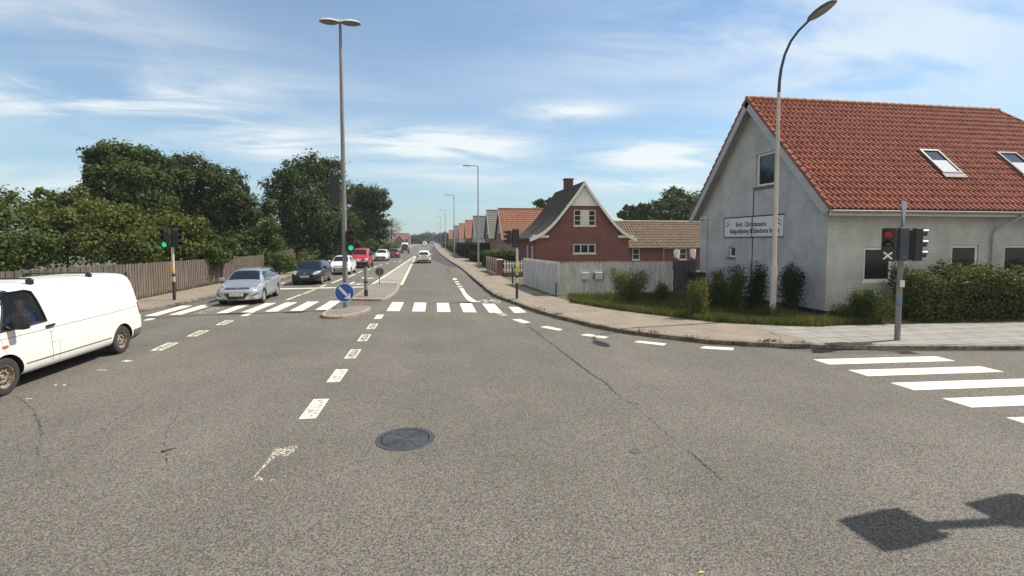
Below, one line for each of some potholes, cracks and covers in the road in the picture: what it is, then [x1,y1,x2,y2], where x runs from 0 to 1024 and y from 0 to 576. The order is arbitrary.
manhole cover [375,427,435,451]
